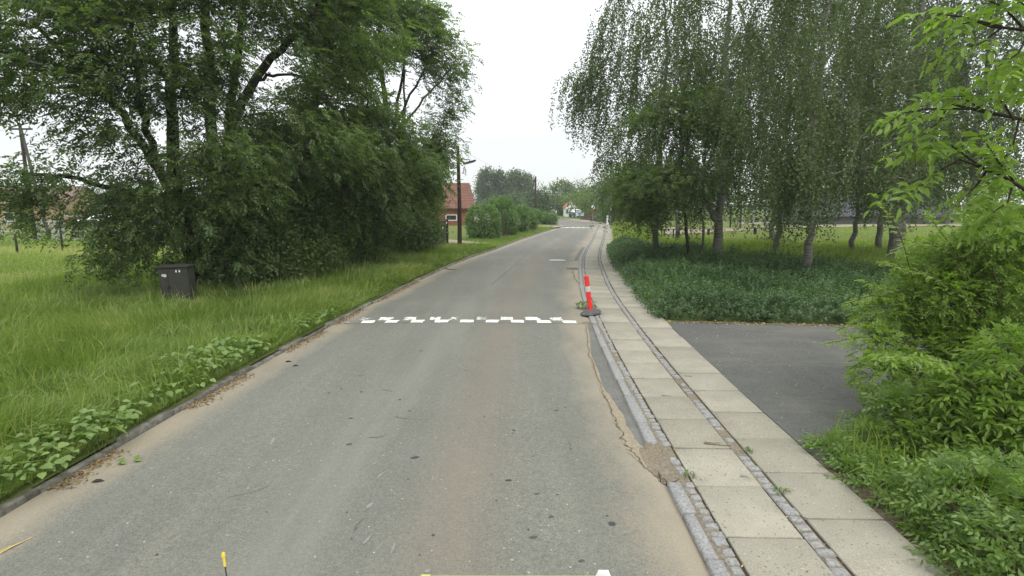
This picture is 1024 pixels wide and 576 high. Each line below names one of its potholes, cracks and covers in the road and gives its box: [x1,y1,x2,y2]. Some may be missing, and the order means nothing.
crack [585,324,646,468]
pothole [639,443,679,485]
